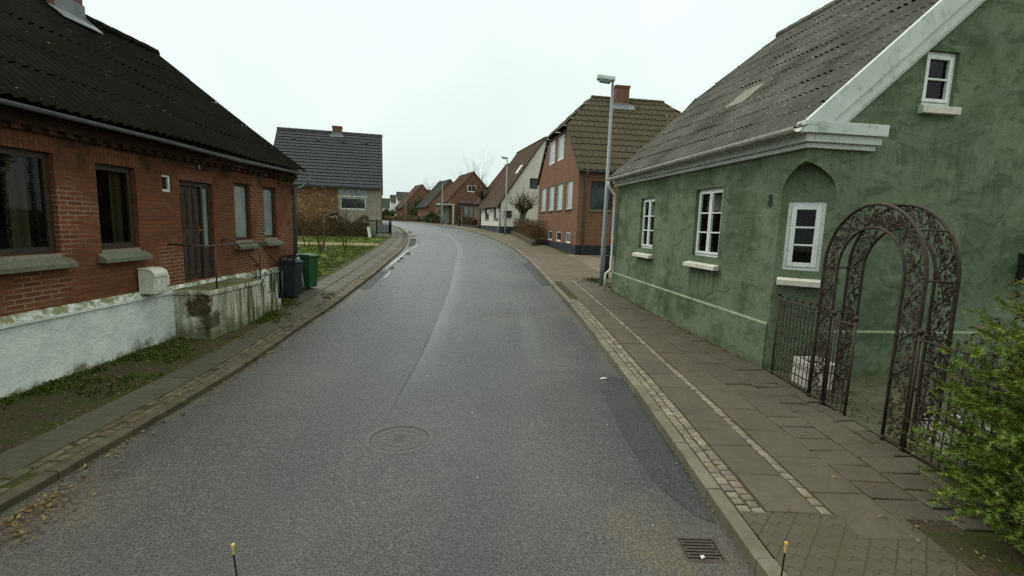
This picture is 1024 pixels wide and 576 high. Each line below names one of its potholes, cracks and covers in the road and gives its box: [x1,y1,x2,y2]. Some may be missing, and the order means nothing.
drain grate [675,537,729,563]
manhole cover [364,424,434,454]
